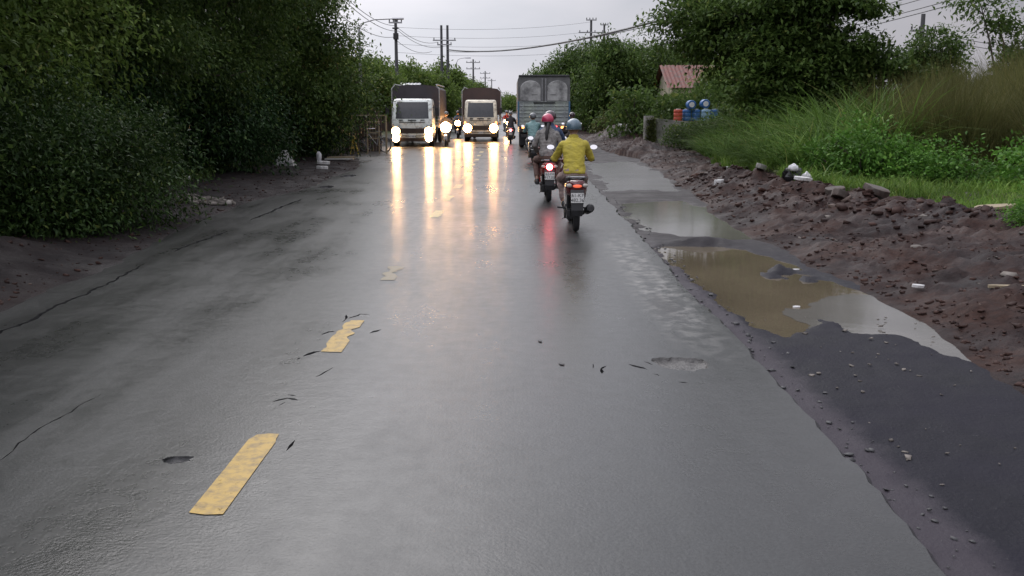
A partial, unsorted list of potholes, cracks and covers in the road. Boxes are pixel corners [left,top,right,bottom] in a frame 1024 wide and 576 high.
crack [273,314,380,405]
pothole [651,357,709,371]
pothole [653,236,859,338]
crack [0,265,141,334]
pothole [162,456,193,464]
crack [174,231,227,252]
crack [251,199,301,220]
crack [1,394,101,460]
